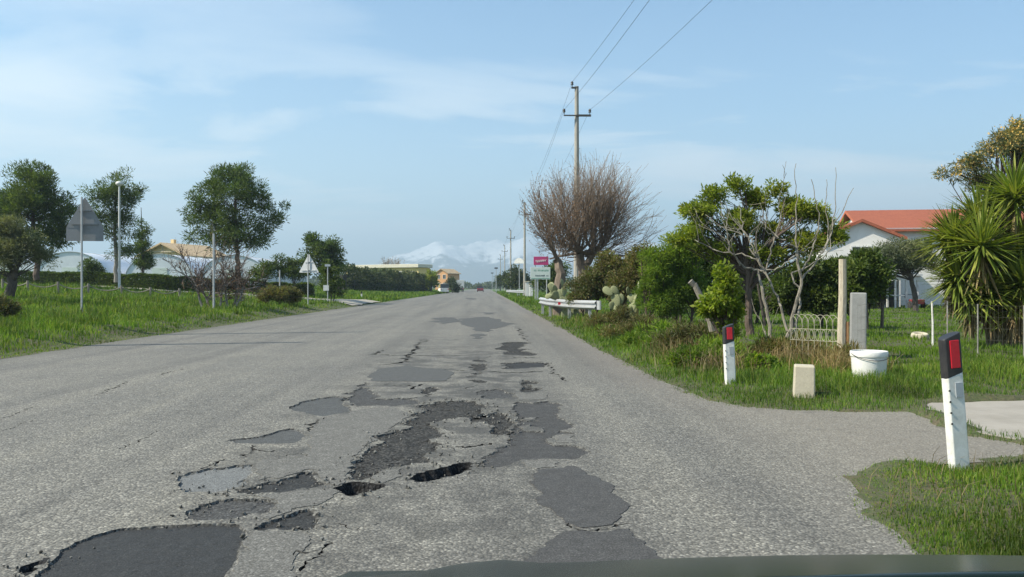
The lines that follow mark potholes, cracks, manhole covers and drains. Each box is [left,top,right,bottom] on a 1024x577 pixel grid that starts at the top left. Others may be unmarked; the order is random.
pothole [347,400,489,480]
crack [293,523,378,571]
crack [372,339,465,371]
pothole [185,498,278,520]
pothole [333,481,386,496]
pothole [254,509,320,531]
